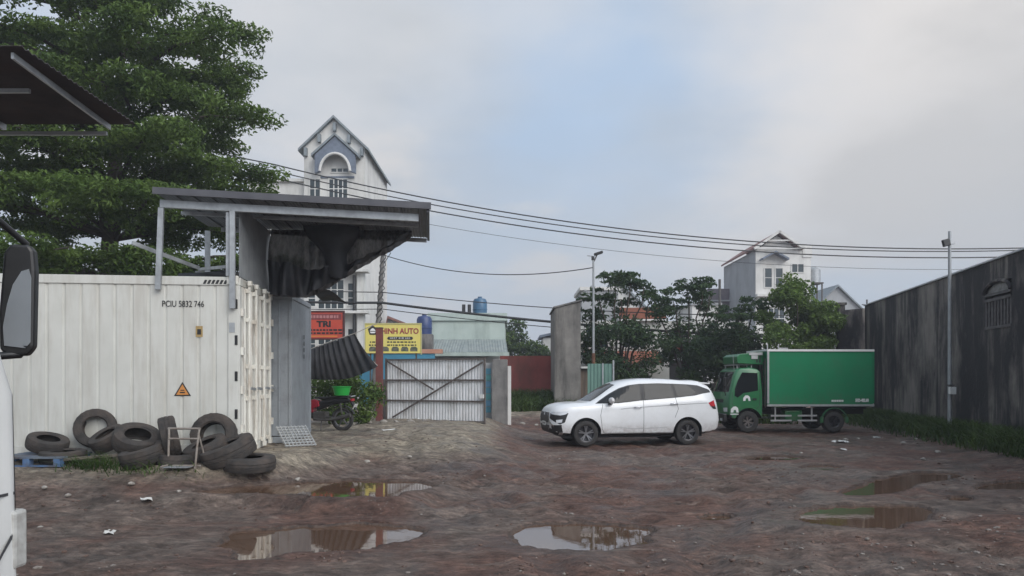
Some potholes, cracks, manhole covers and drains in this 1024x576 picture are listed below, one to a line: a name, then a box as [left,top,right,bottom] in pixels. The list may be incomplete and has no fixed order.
pothole [211,521,429,560]
pothole [838,471,965,496]
pothole [793,503,936,529]
pothole [507,521,657,551]
pothole [192,474,438,513]
pothole [973,480,1024,490]
